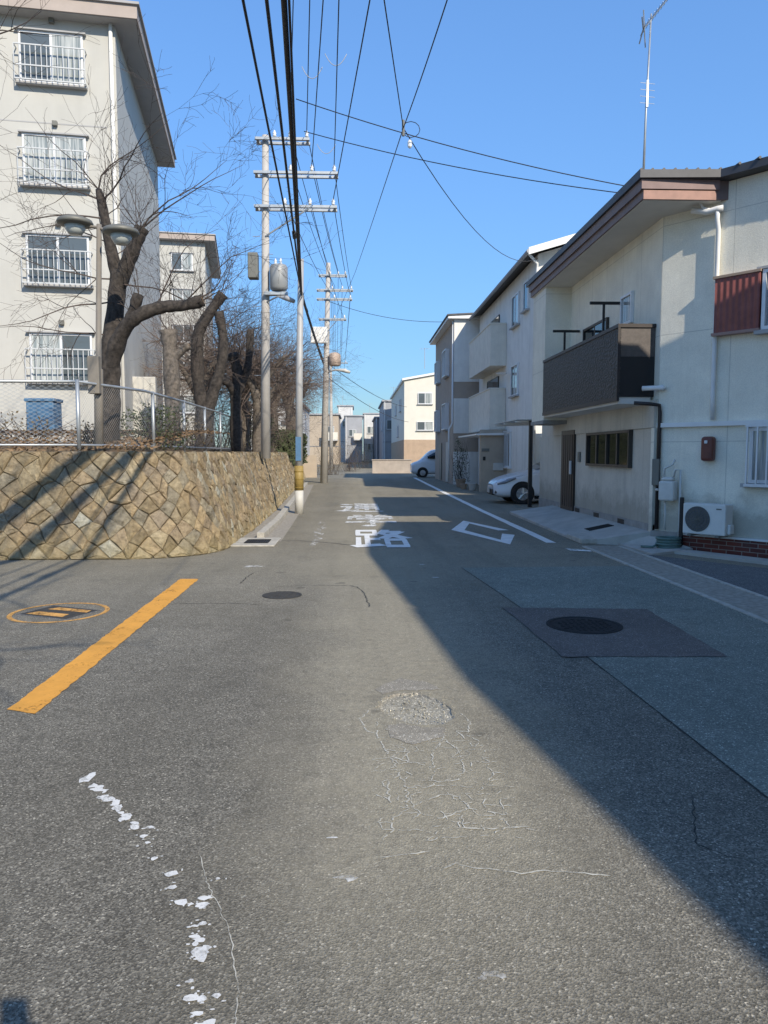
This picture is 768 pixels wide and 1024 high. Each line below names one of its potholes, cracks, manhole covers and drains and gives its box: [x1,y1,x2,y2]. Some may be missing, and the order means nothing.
manhole cover [546,616,623,634]
manhole cover [262,591,302,599]
crack [691,799,735,858]
drain grate [231,537,281,547]
crack [200,856,240,1024]
crack [359,710,537,841]
crack [385,851,610,876]
